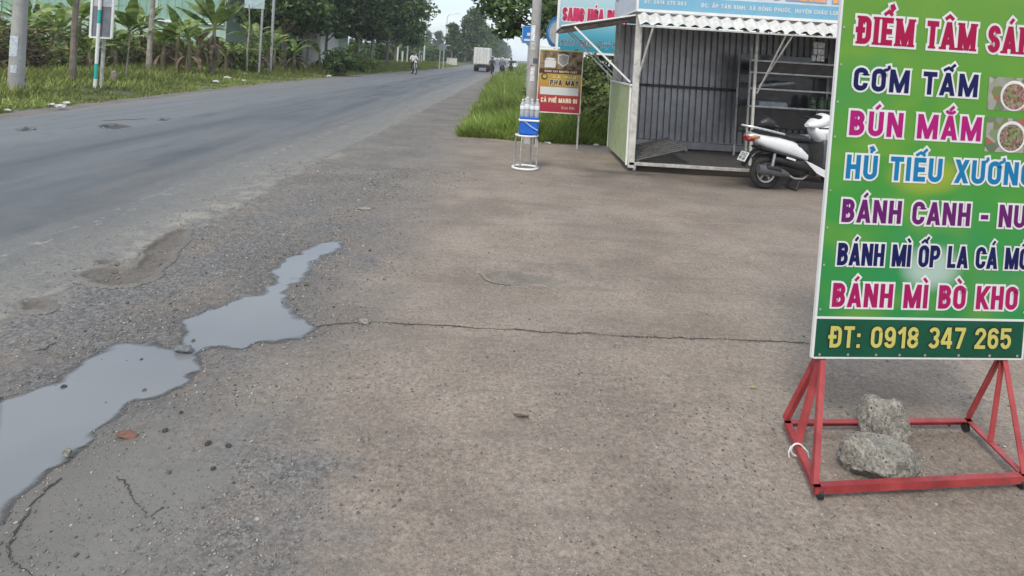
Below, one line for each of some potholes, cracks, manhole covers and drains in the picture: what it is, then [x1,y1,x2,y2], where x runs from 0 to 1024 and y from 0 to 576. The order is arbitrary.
crack [117,478,161,519]
crack [7,477,62,576]
pothole [75,228,194,289]
pothole [14,298,62,315]
pothole [98,122,134,130]
